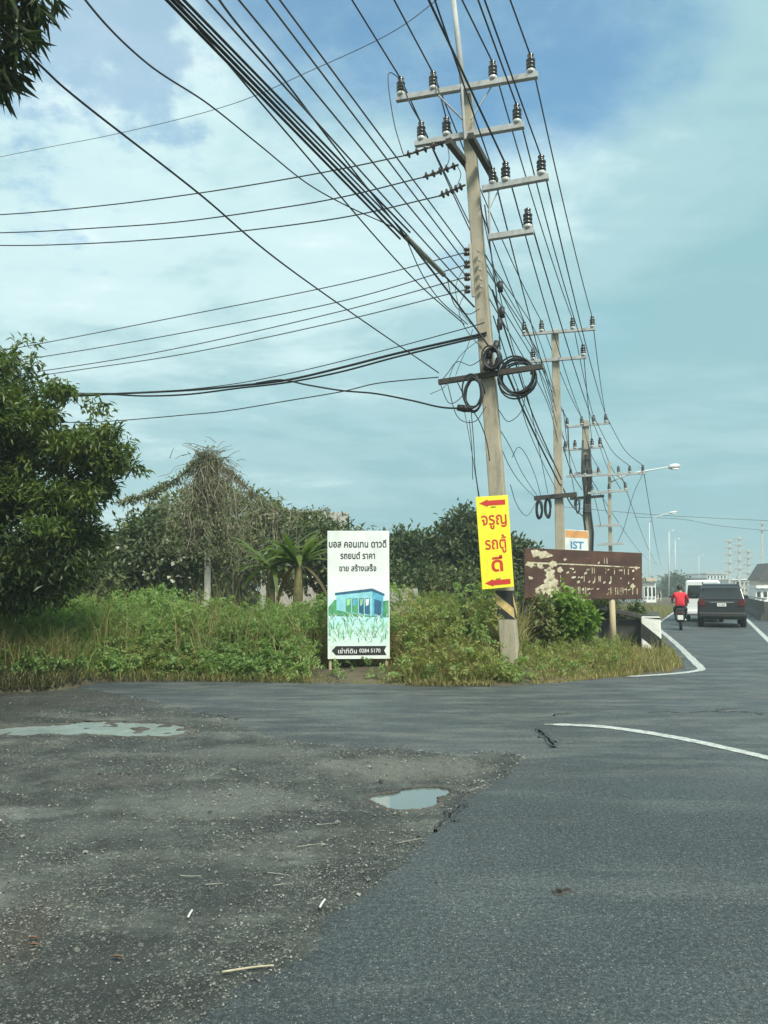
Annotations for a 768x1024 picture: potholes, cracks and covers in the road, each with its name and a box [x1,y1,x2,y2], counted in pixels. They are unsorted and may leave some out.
crack [433,802,466,832]
pothole [361,785,455,812]
crack [535,713,569,748]
pothole [0,719,197,738]
